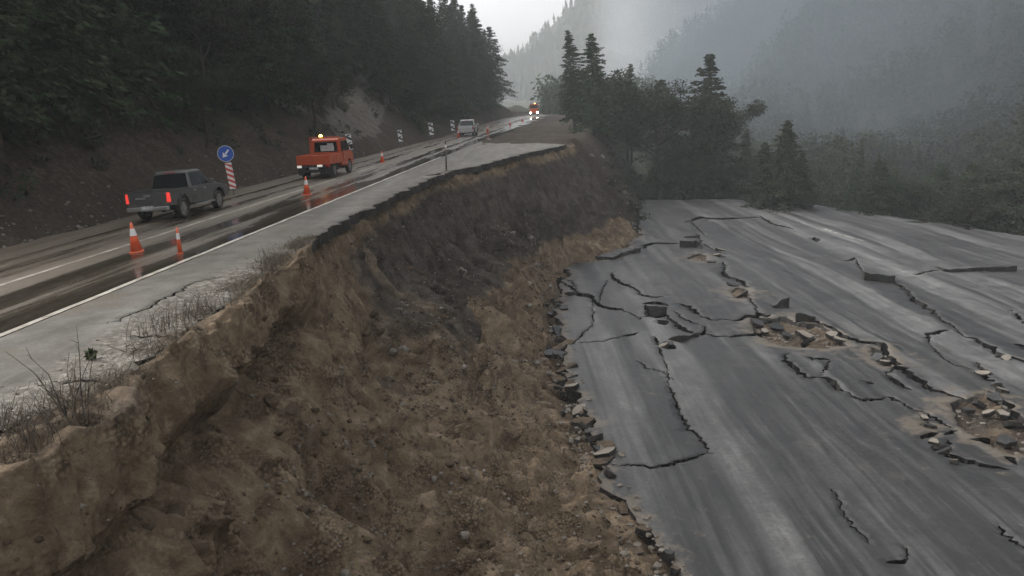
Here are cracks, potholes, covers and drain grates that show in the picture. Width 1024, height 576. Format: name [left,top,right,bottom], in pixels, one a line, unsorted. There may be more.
crack [782,270,1024,470]
pothole [751,316,847,349]
crack [998,526,1020,546]
crack [831,489,869,540]
crack [557,216,790,469]
crack [886,546,909,564]
pothole [950,392,1024,456]
crack [121,278,215,319]
